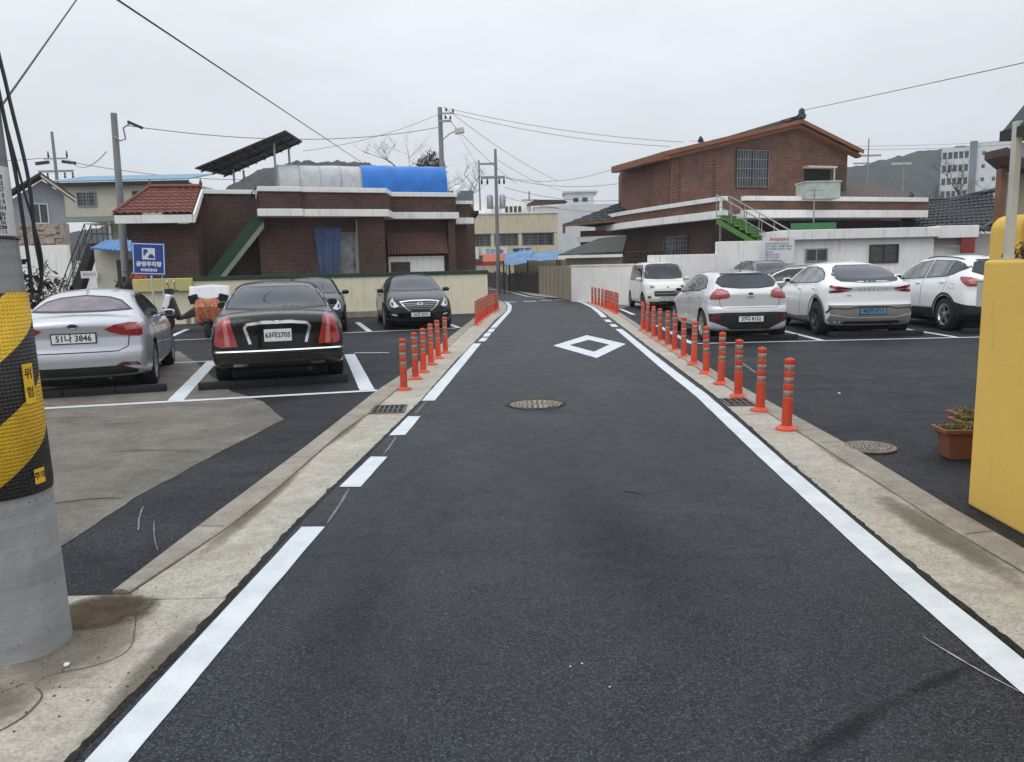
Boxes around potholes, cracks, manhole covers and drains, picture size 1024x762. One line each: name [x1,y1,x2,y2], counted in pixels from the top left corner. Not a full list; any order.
manhole cover [504,399,567,410]
drain grate [369,404,407,414]
manhole cover [844,441,897,454]
drain grate [719,398,756,406]
